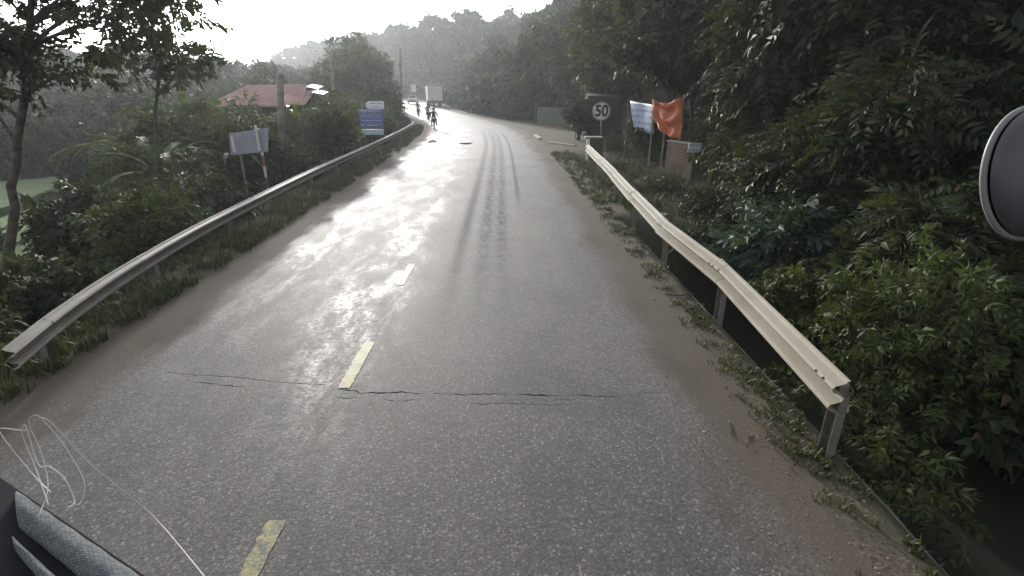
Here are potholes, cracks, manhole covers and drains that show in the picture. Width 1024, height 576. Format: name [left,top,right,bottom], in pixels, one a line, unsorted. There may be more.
crack [170,372,663,405]
